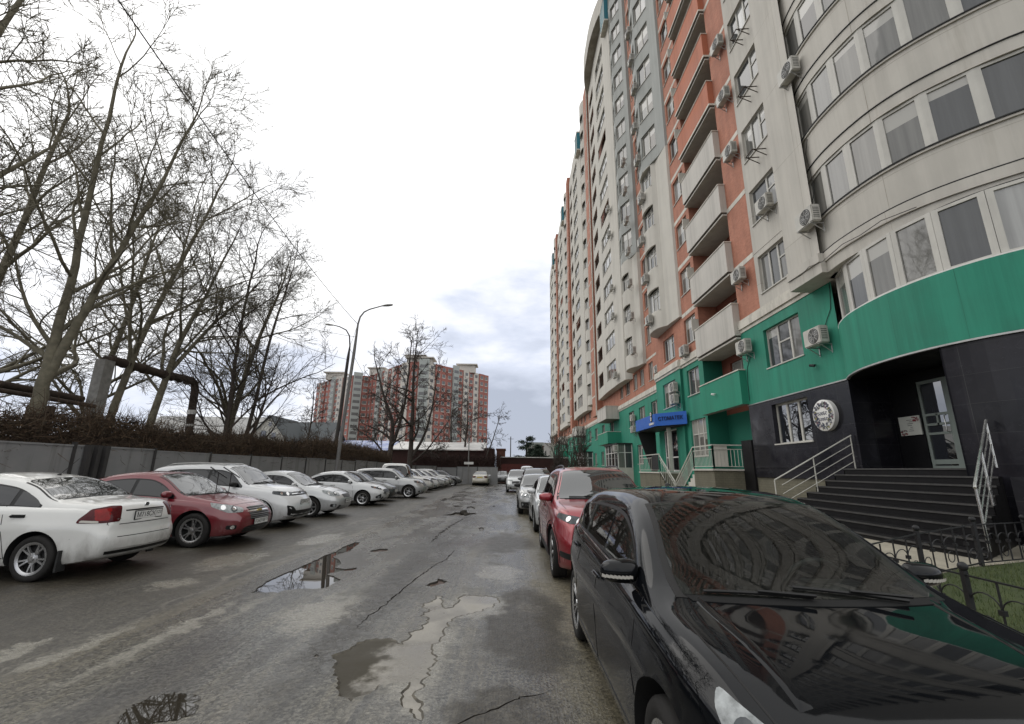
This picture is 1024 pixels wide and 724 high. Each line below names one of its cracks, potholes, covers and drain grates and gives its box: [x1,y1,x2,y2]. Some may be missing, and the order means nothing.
crack [458,690,552,724]
crack [357,494,471,628]
pothole [331,594,500,721]
